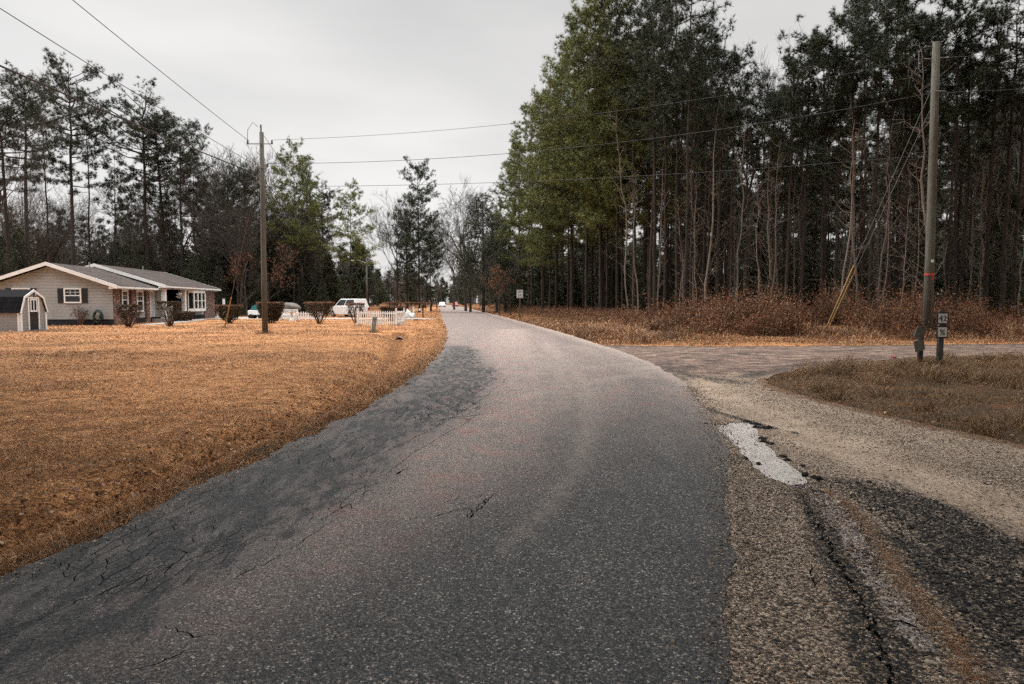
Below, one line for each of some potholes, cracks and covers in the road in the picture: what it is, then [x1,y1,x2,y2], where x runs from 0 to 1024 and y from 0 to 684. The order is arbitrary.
crack [801,496,916,684]
crack [0,347,506,677]
